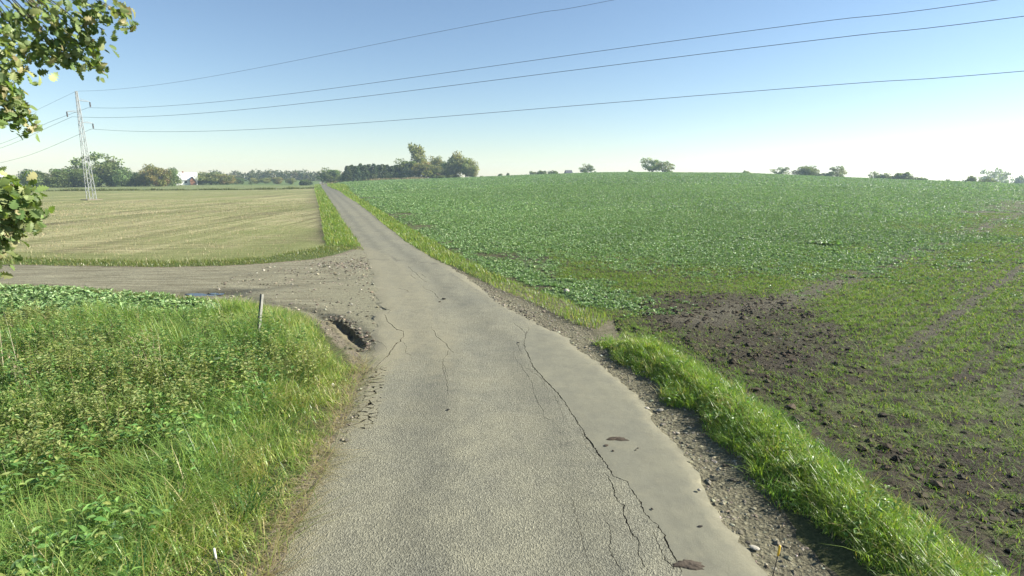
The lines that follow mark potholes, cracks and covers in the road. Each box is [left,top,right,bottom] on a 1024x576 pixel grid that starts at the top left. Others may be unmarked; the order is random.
pothole [322,320,366,349]
crack [516,330,682,574]
